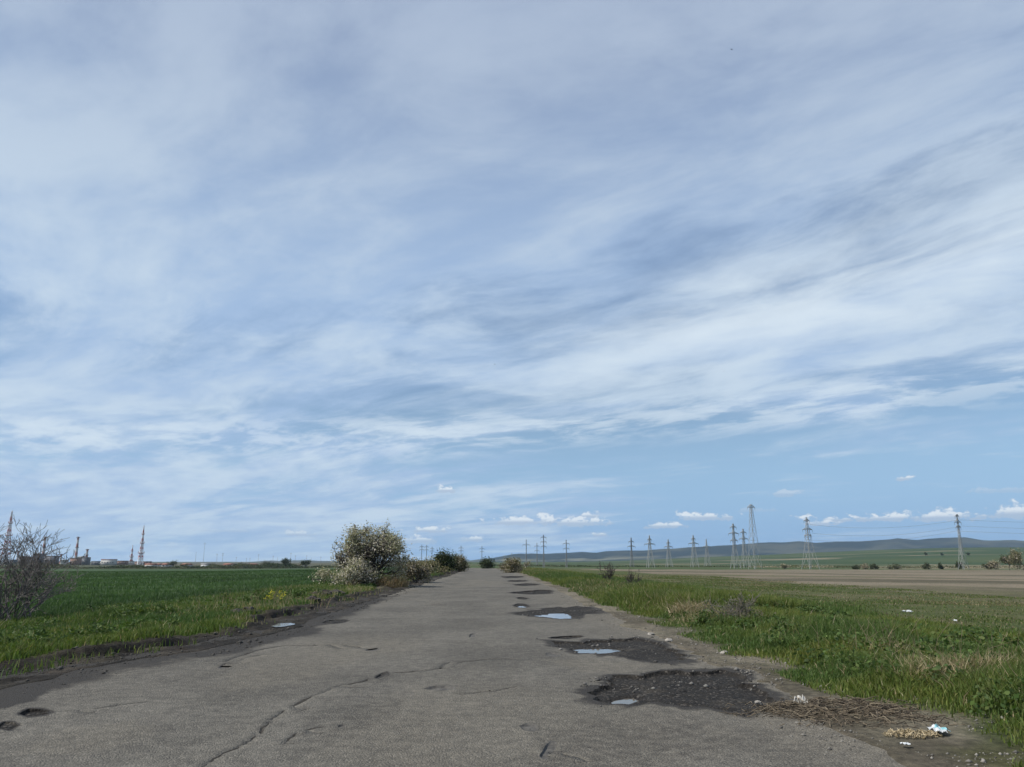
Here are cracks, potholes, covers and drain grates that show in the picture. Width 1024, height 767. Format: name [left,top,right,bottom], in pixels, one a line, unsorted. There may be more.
crack [191,644,525,767]
pothole [4,707,65,719]
pothole [503,606,610,620]
pothole [0,720,33,733]
pothole [572,667,789,716]
pothole [536,635,699,665]
